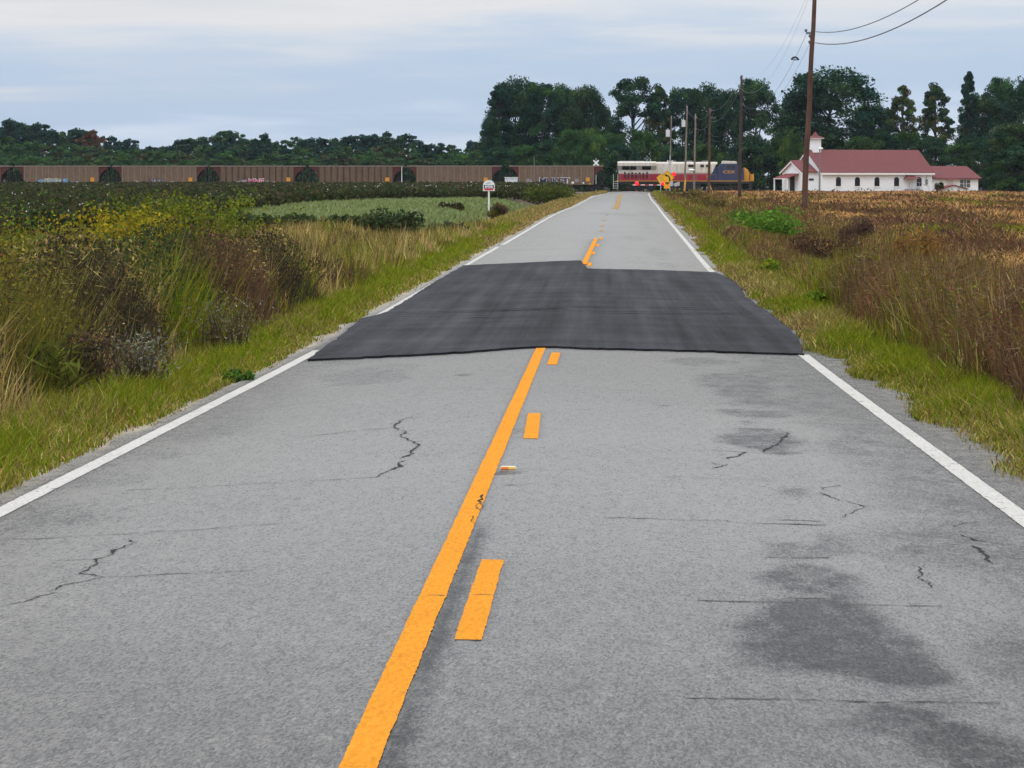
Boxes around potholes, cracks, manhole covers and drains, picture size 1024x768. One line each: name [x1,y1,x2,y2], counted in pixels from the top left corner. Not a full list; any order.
crack [680,431,791,480]
crack [952,522,1005,564]
crack [126,416,421,491]
crack [819,485,864,517]
crack [0,523,278,605]
